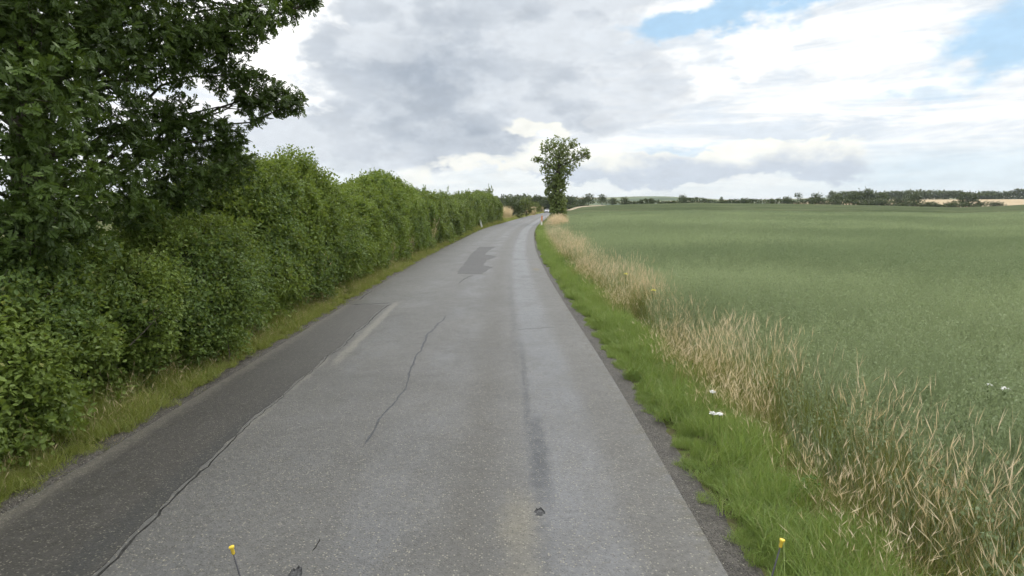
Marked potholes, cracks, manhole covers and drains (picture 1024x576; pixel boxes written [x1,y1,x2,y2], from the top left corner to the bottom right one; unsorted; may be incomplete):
crack [354,292,445,444]
pothole [288,565,302,576]
